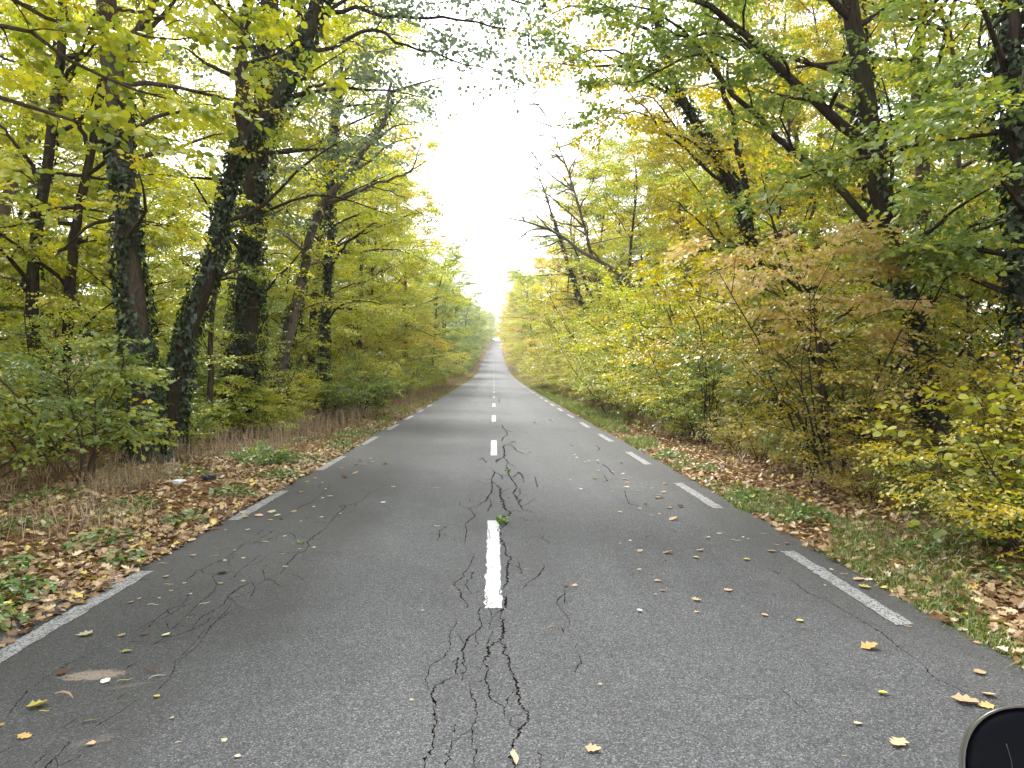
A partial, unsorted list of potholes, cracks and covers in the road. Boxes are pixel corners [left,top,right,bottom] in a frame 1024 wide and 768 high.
crack [772,570,976,705]
crack [556,588,582,673]
crack [423,444,550,768]
crack [33,484,369,768]
